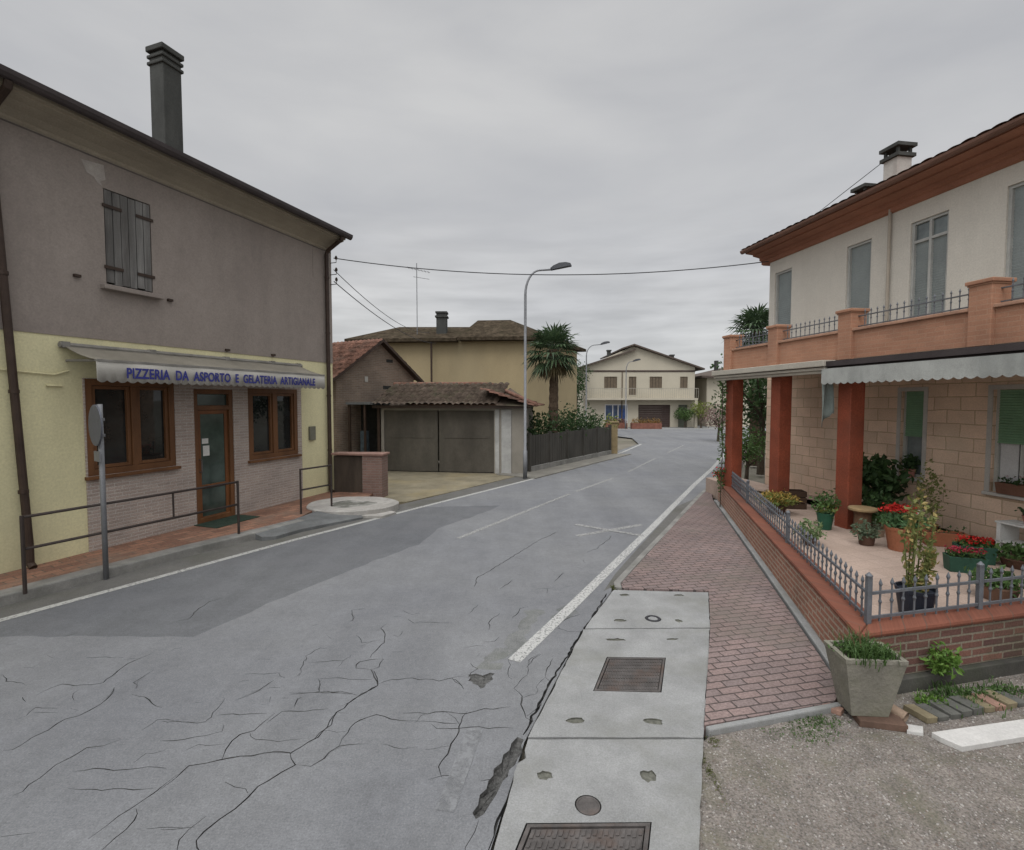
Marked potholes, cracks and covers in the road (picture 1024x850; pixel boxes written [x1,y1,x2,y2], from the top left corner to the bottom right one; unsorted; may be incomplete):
crack [78,609,478,850]
crack [415,594,607,850]
manhole cover [517,823,650,850]
crack [3,648,197,795]
pothole [537,771,553,780]
pothole [473,737,524,819]
pothole [640,770,656,783]
pothole [468,673,495,689]
manhole cover [576,796,600,816]
